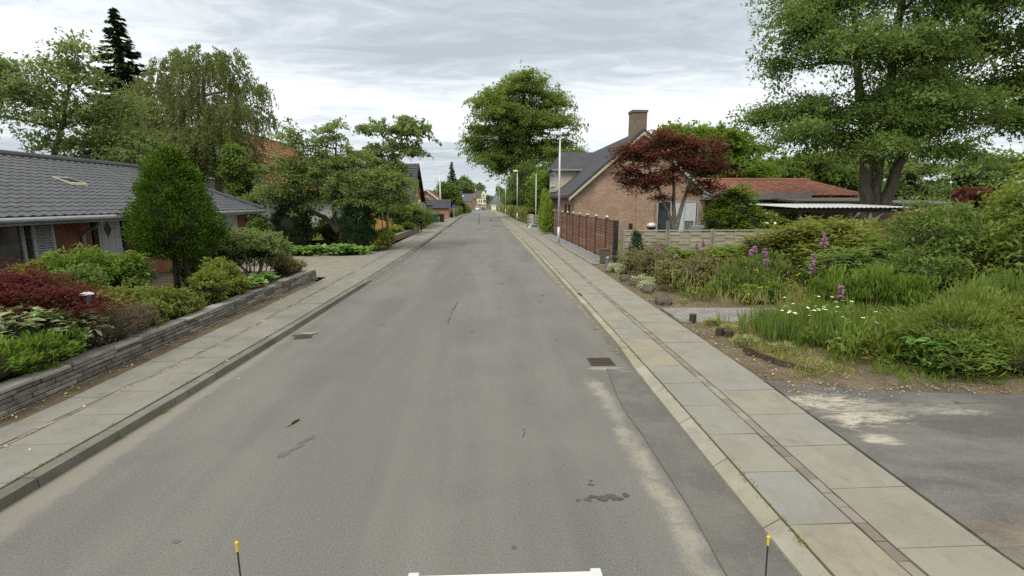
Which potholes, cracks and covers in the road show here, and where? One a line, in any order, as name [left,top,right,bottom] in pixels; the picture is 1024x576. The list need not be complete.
drain grate [587,358,616,366]
